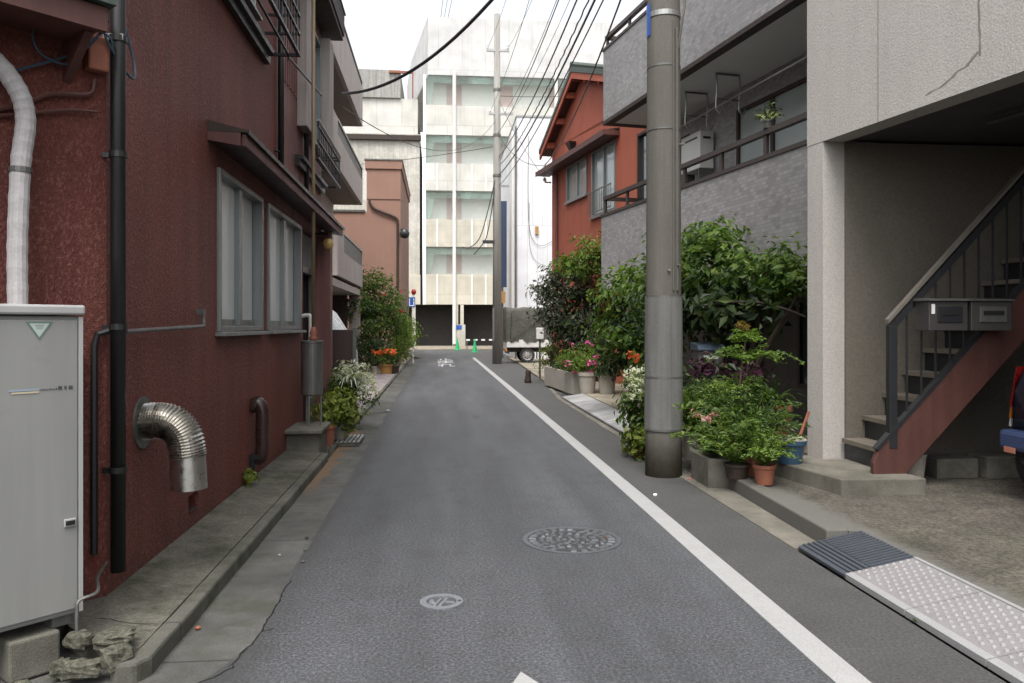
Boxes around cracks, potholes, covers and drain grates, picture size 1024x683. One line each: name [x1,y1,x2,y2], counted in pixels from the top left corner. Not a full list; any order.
manhole cover [523,527,622,554]
utility cover [420,594,463,610]
crack [198,581,292,683]
drain grate [335,434,365,447]
